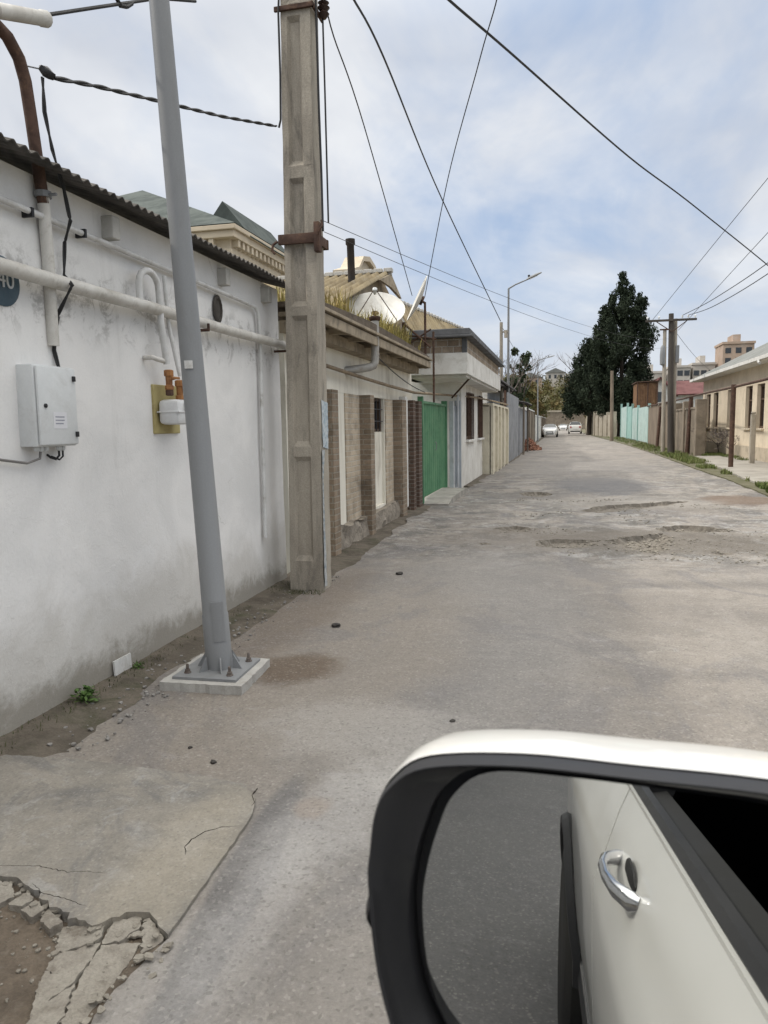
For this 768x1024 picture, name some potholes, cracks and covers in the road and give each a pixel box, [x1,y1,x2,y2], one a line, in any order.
crack [1,865,102,905]
pothole [535,539,599,549]
pothole [582,501,689,513]
pothole [605,533,674,553]
